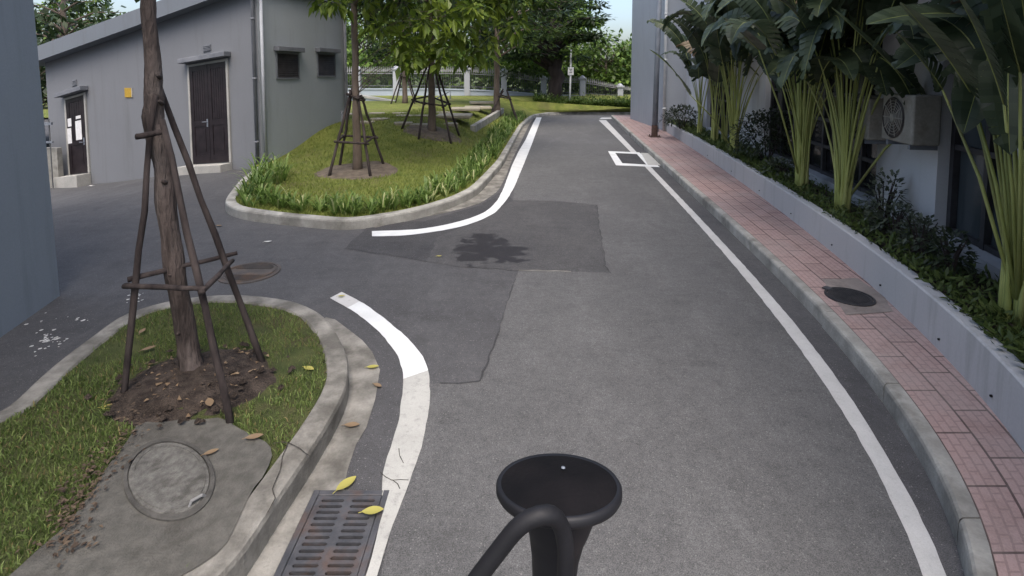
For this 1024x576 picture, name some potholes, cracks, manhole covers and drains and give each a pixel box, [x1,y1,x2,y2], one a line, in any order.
manhole cover [217,262,281,284]
manhole cover [822,286,876,307]
drain grate [274,490,389,576]
manhole cover [123,438,215,522]
